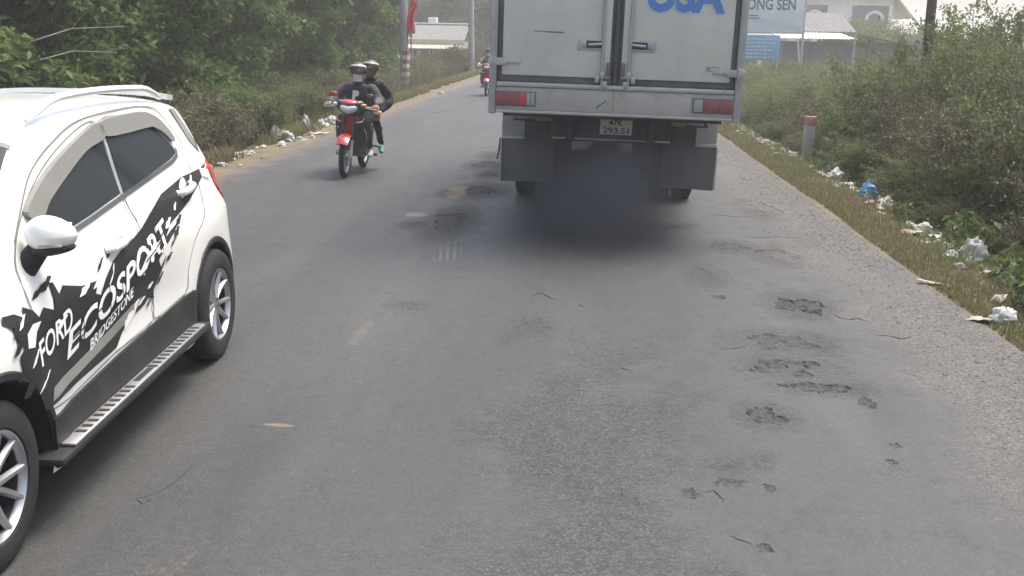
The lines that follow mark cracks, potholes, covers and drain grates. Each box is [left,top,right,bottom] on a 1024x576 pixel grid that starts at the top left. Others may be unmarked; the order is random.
pothole [713,478,747,487]
crack [130,462,197,504]
crack [830,314,911,339]
pothole [747,359,821,378]
pothole [776,382,853,394]
pothole [746,333,821,350]
pothole [433,212,469,233]
pothole [755,543,775,553]
pothole [743,407,790,425]
pothole [773,298,826,316]
pothole [857,396,878,409]
pothole [679,488,703,500]
